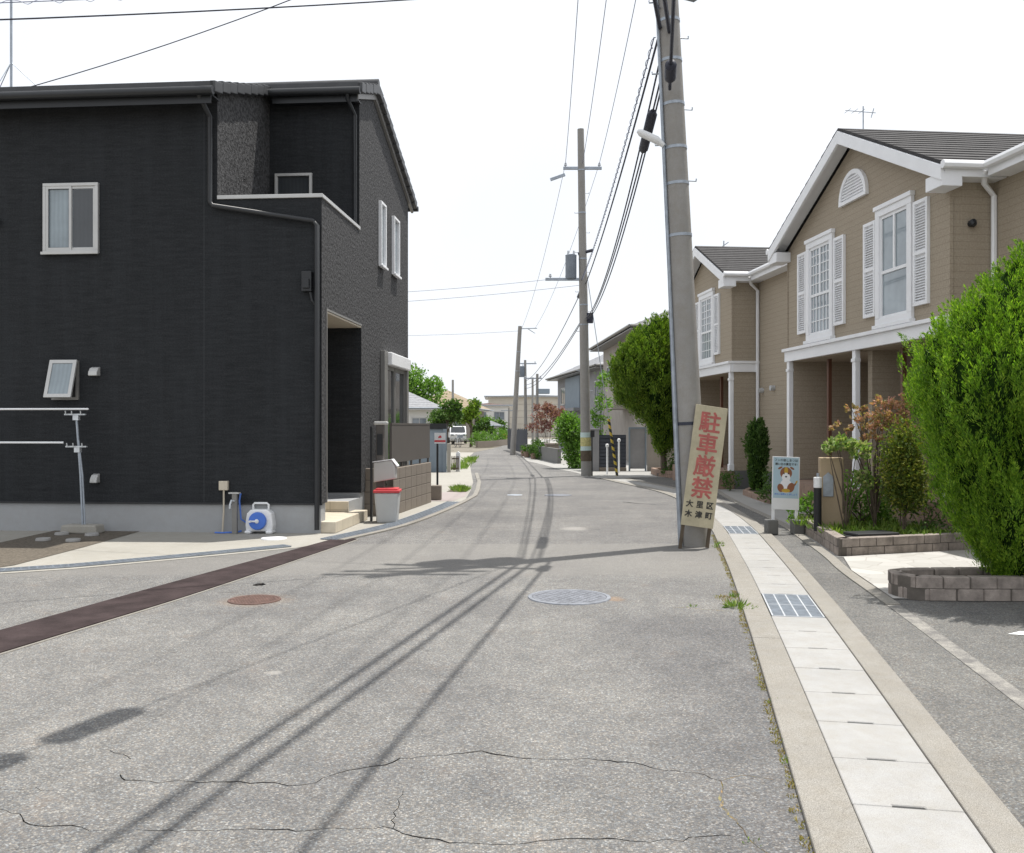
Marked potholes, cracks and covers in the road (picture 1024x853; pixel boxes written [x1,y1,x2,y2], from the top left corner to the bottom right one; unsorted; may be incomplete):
crack [1,809,108,850]
crack [120,751,775,853]
manhole cover [227,595,281,605]
drain grate [762,593,825,618]
manhole cover [528,589,611,605]
drain grate [723,526,758,534]
